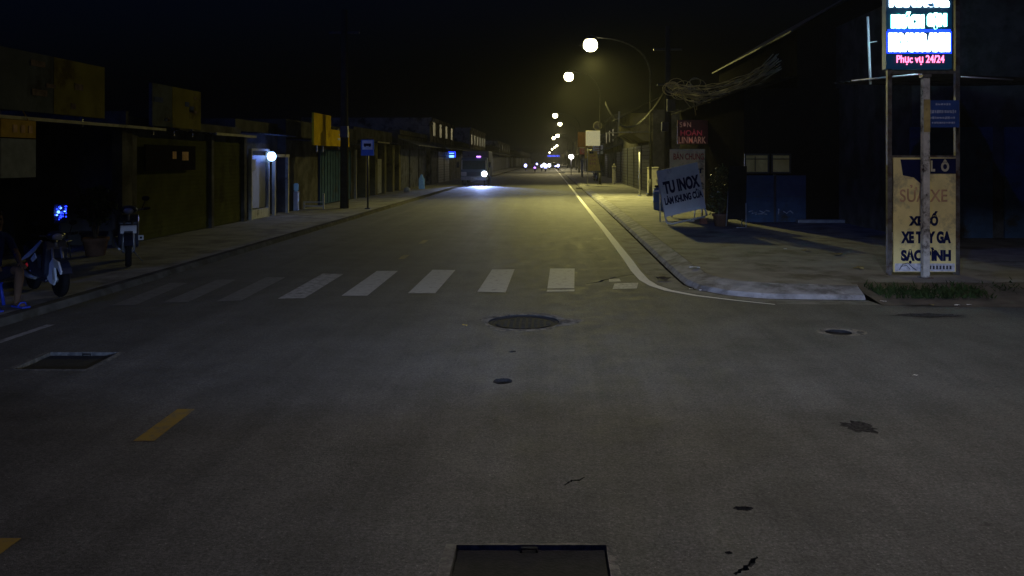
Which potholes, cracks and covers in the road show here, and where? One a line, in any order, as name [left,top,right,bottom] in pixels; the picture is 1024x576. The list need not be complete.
manhole cover [5,352,125,371]
pothole [839,420,878,434]
manhole cover [437,543,622,576]
manhole cover [480,313,584,332]
crack [733,556,758,575]
manhole cover [817,328,868,336]
